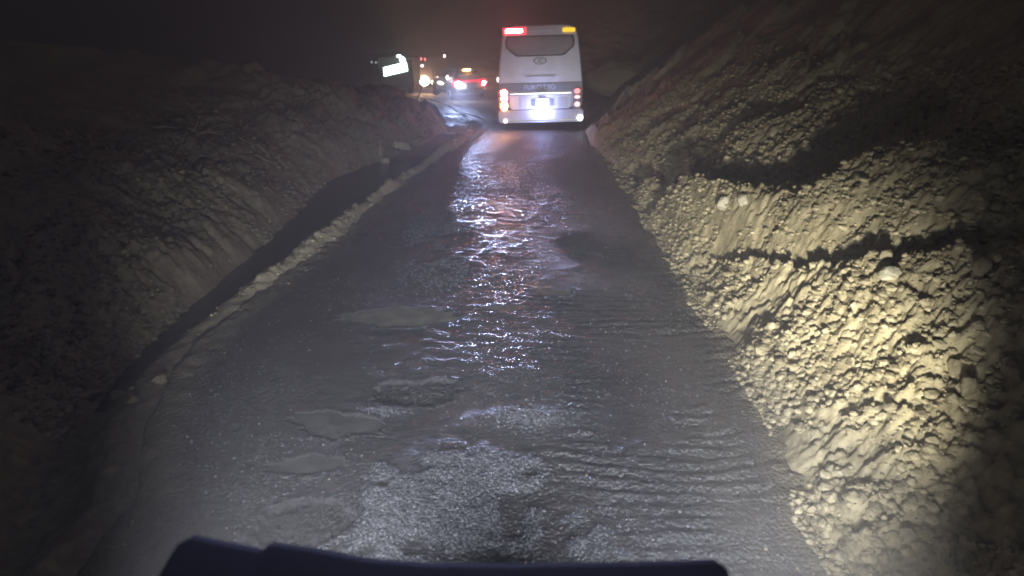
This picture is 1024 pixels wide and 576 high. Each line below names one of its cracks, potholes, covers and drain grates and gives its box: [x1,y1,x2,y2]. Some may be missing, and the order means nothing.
pothole [233,491,371,550]
pothole [360,374,473,411]
